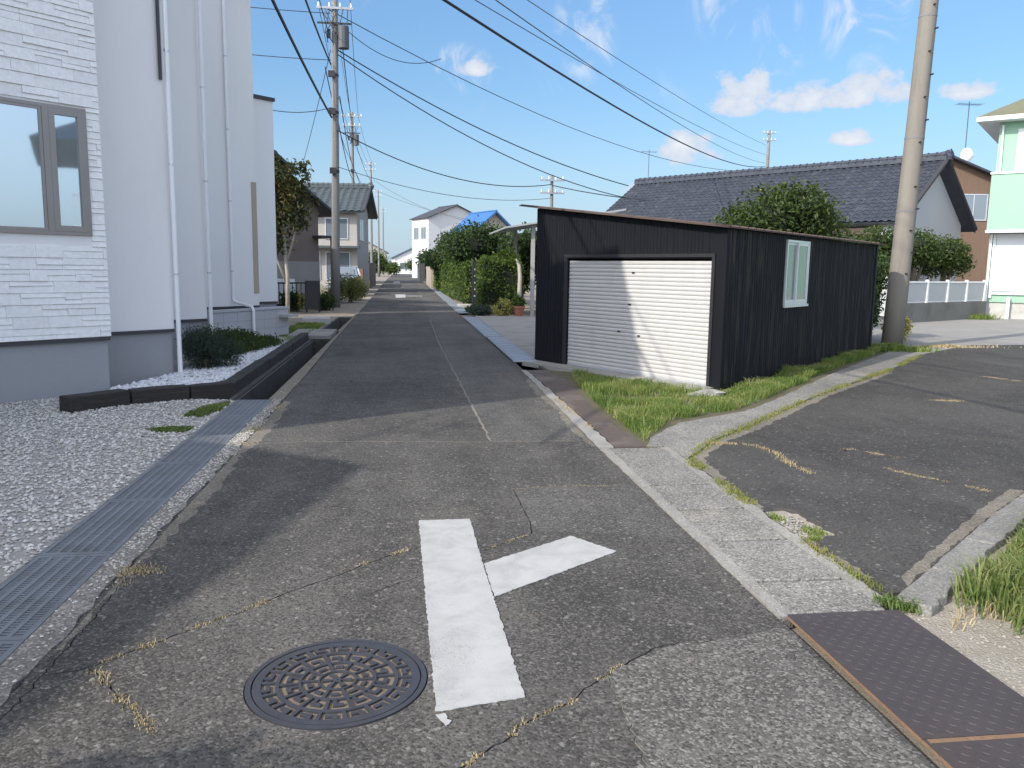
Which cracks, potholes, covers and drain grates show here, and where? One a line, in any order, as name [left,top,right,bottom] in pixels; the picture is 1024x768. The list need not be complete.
crack [706,441,814,474]
drain grate [217,400,271,416]
manhole cover [244,639,427,731]
drain grate [0,640,25,665]
drain grate [108,463,206,501]
drain grate [38,500,169,556]
drain grate [157,436,234,463]
crack [481,484,622,552]
crack [843,447,987,491]
drain grate [191,415,255,436]
drain grate [0,554,113,641]
pothole [762,507,838,541]
